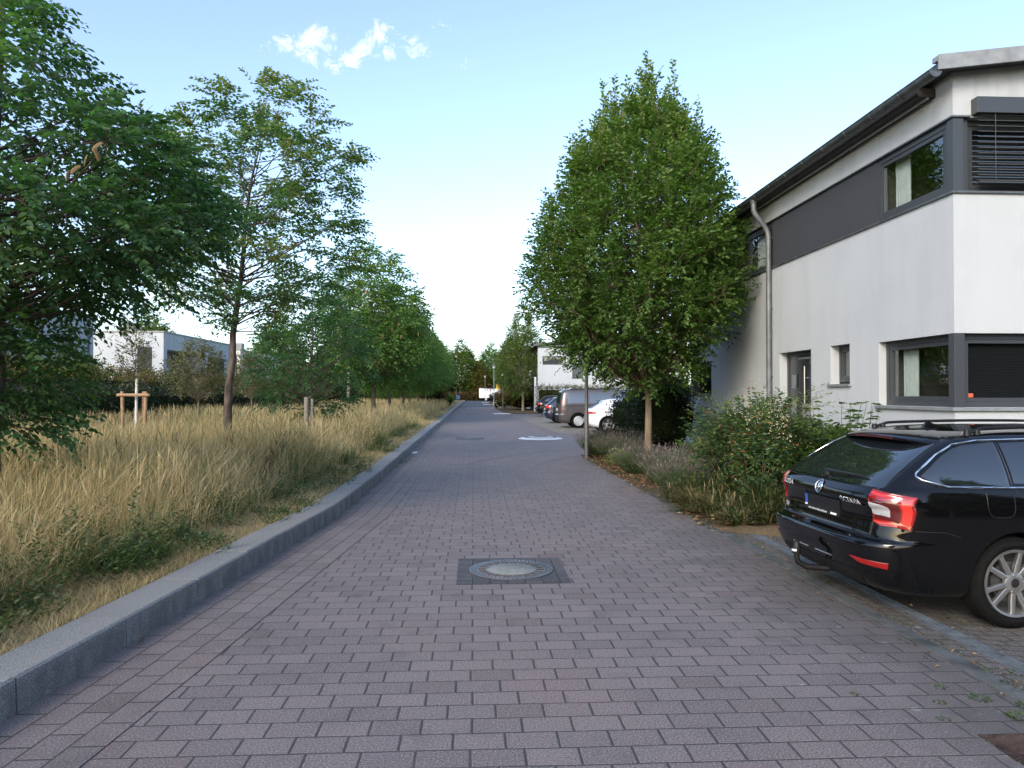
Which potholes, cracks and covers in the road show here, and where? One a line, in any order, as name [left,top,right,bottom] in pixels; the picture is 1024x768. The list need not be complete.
manhole cover [456,557,571,584]
